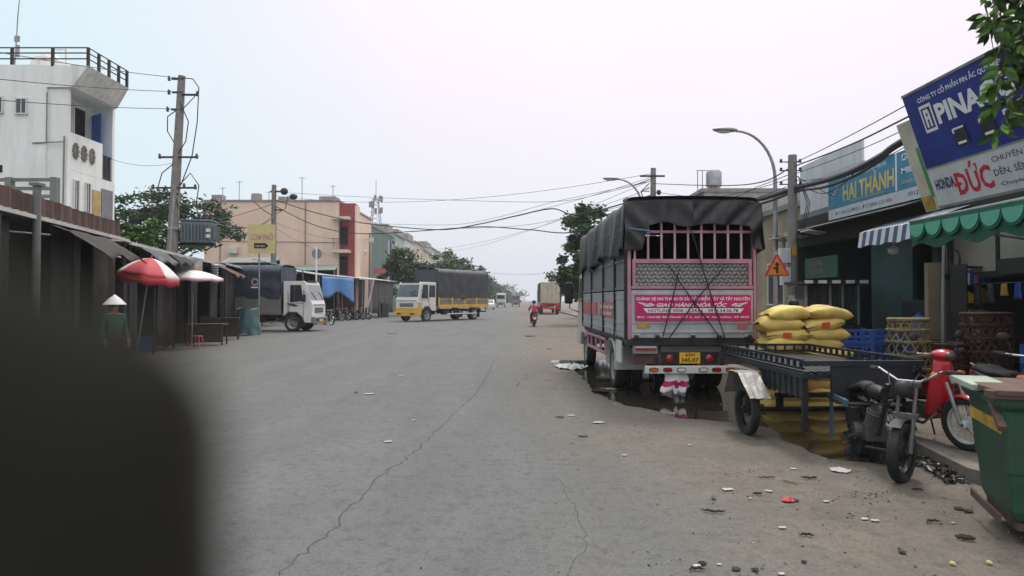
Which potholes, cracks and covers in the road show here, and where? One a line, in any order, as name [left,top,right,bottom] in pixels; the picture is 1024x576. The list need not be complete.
crack [553,476,588,576]
crack [279,357,502,576]
